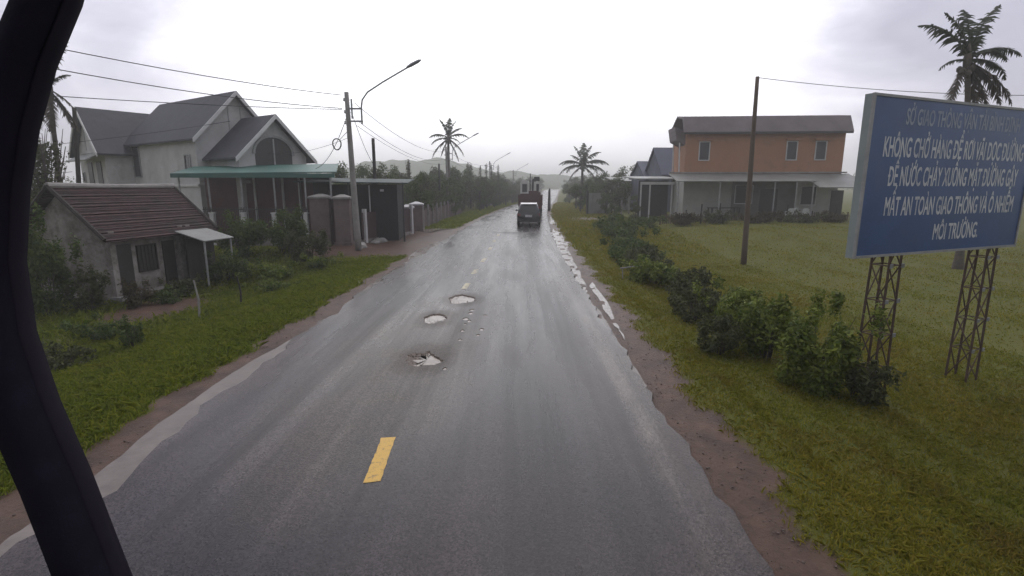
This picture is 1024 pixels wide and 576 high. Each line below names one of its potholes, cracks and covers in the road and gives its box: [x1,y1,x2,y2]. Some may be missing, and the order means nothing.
pothole [405,351,443,367]
pothole [448,294,476,304]
pothole [424,314,447,324]
